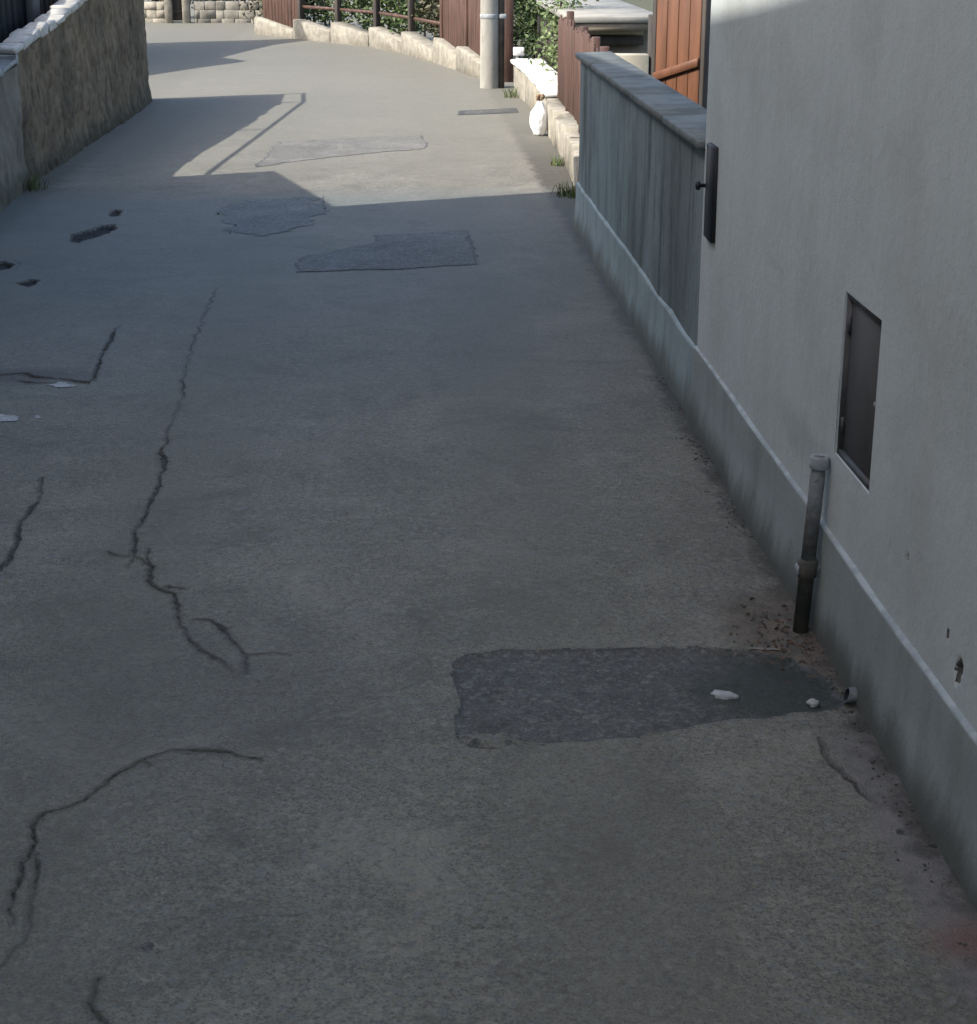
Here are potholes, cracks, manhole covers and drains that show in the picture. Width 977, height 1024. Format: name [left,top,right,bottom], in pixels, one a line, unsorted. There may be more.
crack [0,288,294,675]
pothole [104,209,128,217]
pothole [65,223,122,244]
crack [815,736,878,804]
pothole [9,278,46,288]
crack [0,748,266,1024]
pothole [0,260,18,271]
